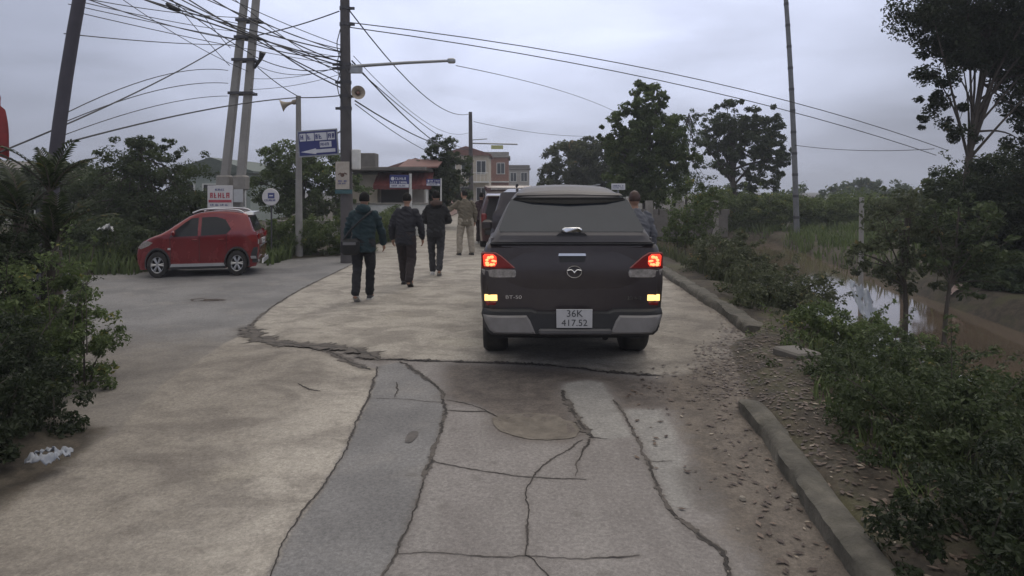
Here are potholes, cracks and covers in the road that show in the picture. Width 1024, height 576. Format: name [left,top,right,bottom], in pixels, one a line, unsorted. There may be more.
crack [270,349,732,576]
